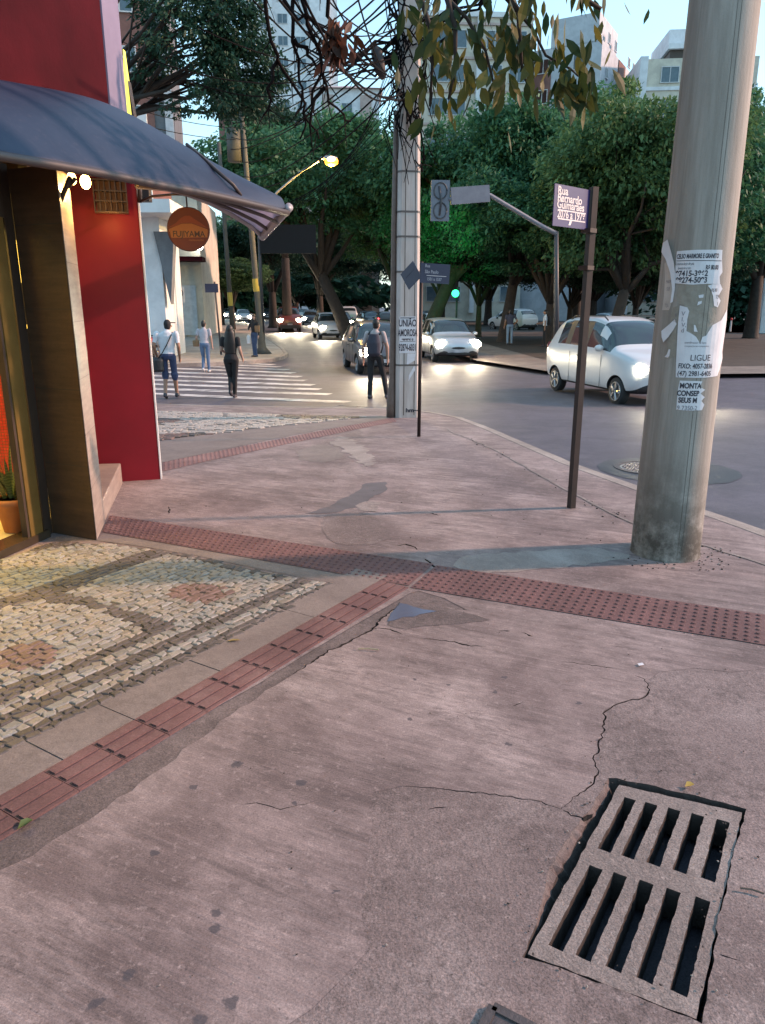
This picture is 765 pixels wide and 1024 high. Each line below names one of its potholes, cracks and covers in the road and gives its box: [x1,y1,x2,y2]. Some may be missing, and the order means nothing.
manhole cover [614,460,640,474]
drain grate [523,778,746,1023]
crack [407,676,650,822]
